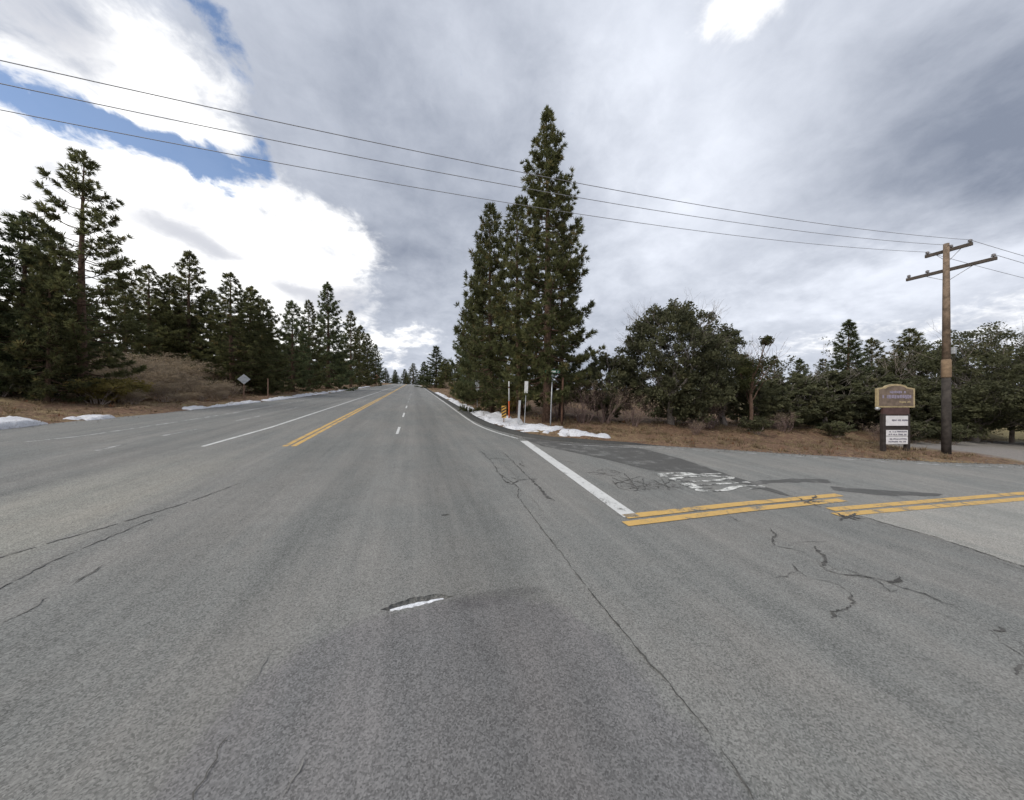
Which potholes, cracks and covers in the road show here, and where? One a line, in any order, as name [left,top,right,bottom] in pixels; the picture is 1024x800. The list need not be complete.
crack [0,514,162,588]
crack [596,469,674,491]
crack [482,452,555,512]
pothole [381,594,453,611]
crack [192,737,227,800]
crack [967,626,1024,675]
crack [770,528,964,625]
